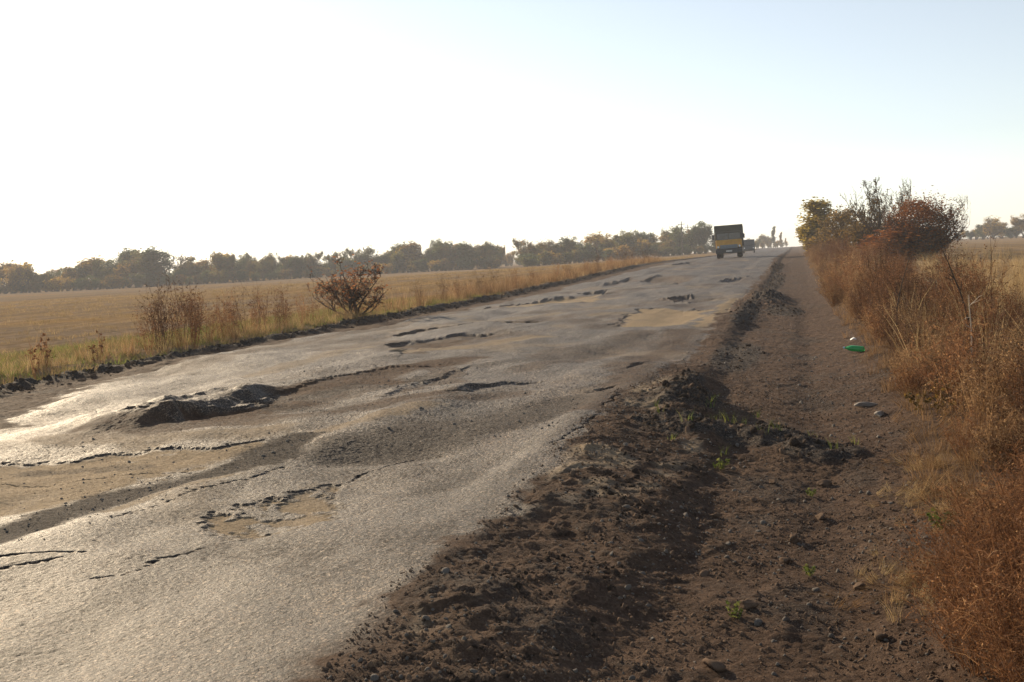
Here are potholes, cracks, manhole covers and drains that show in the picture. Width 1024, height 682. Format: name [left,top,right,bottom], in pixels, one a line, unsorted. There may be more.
pothole [640,274,697,285]
pothole [484,293,606,309]
pothole [719,275,752,283]
pothole [606,308,723,328]
pothole [383,331,530,356]
crack [0,547,208,581]
pothole [119,365,428,428]
pothole [455,380,553,398]
pothole [663,294,735,304]
pothole [196,483,350,542]
